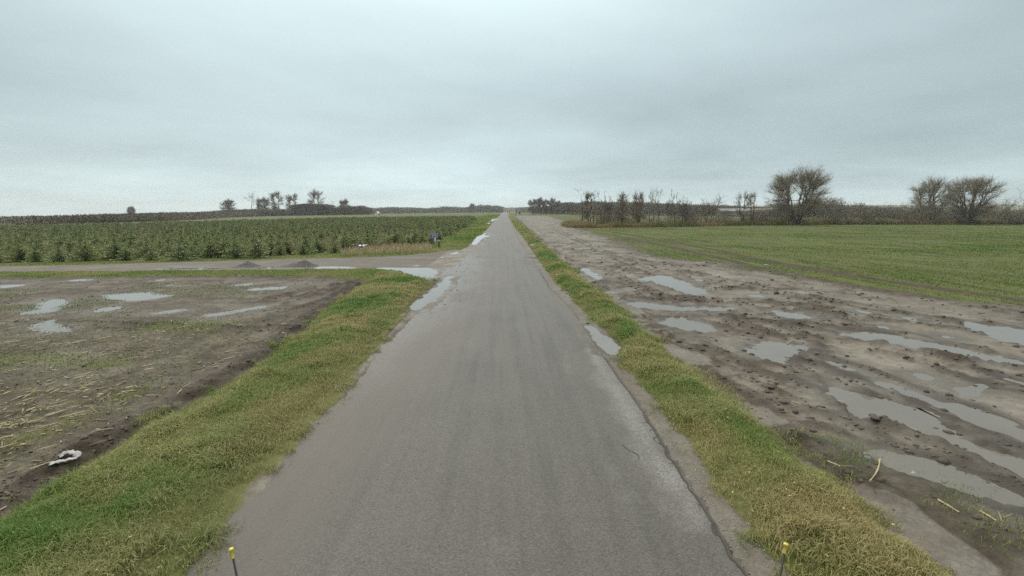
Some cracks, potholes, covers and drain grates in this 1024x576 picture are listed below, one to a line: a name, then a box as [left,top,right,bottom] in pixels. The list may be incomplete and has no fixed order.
crack [601,353,747,576]
